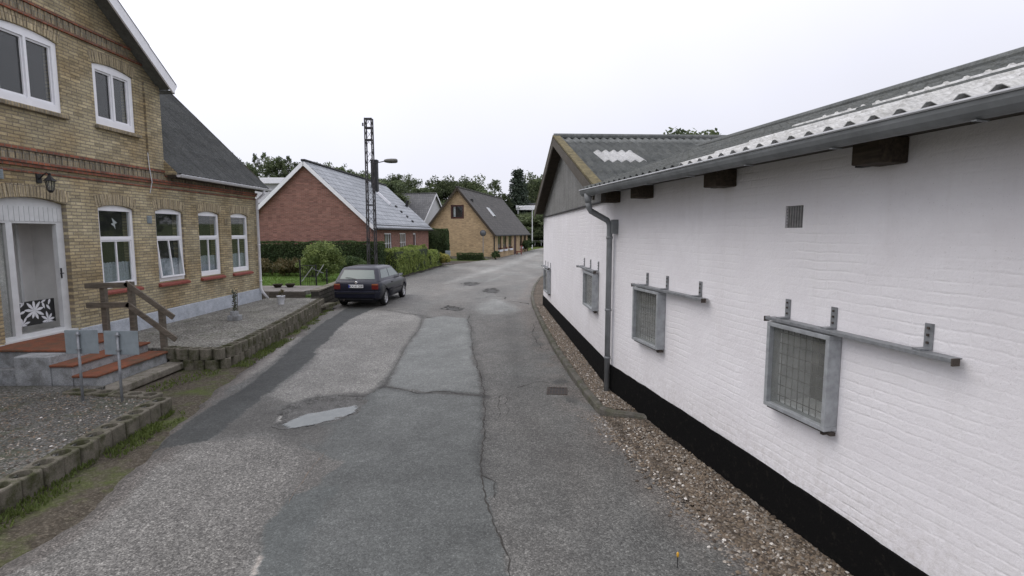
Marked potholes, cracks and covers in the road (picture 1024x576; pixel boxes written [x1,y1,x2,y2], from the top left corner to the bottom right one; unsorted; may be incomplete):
crack [287,310,548,575]
drain grate [546,387,567,395]
